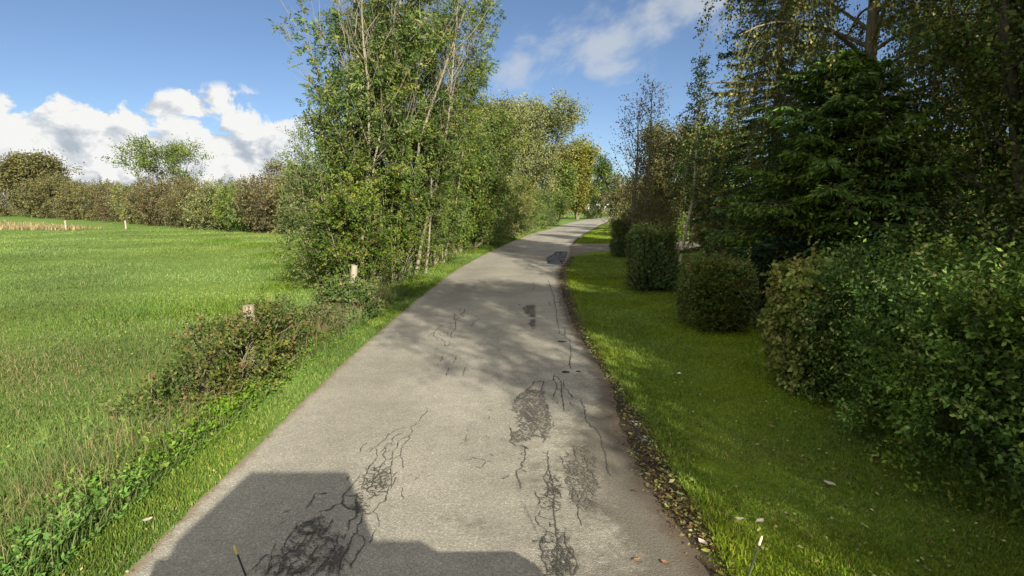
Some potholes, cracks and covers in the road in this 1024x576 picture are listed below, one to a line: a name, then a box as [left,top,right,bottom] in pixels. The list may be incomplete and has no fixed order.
crack [465,281,611,576]
crack [433,309,479,376]
crack [246,410,428,576]
